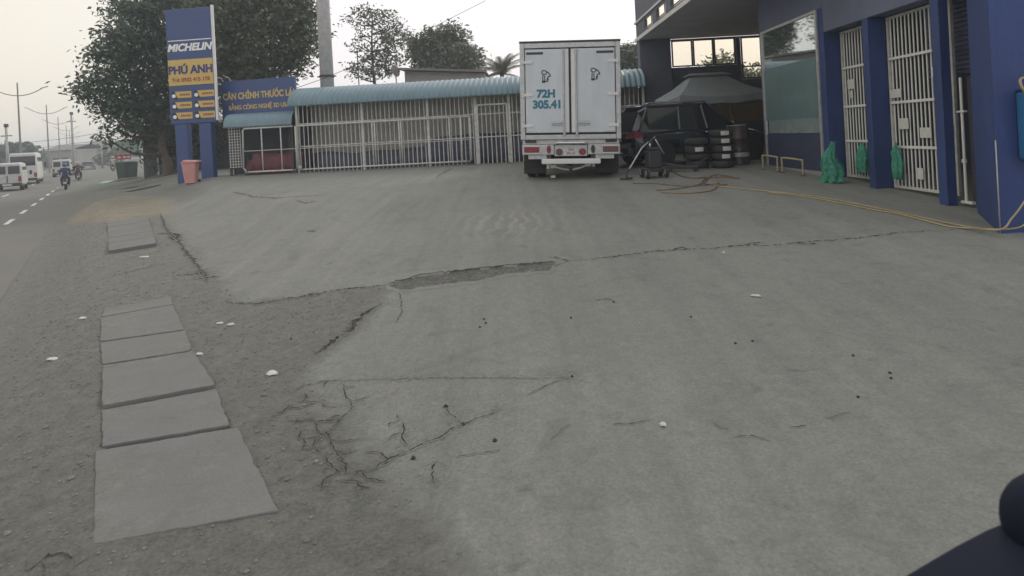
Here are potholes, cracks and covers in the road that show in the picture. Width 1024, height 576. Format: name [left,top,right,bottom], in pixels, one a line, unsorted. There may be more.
pothole [384,260,557,293]
crack [114,192,327,280]
crack [271,376,571,490]
crack [712,423,769,441]
crack [225,284,404,354]
